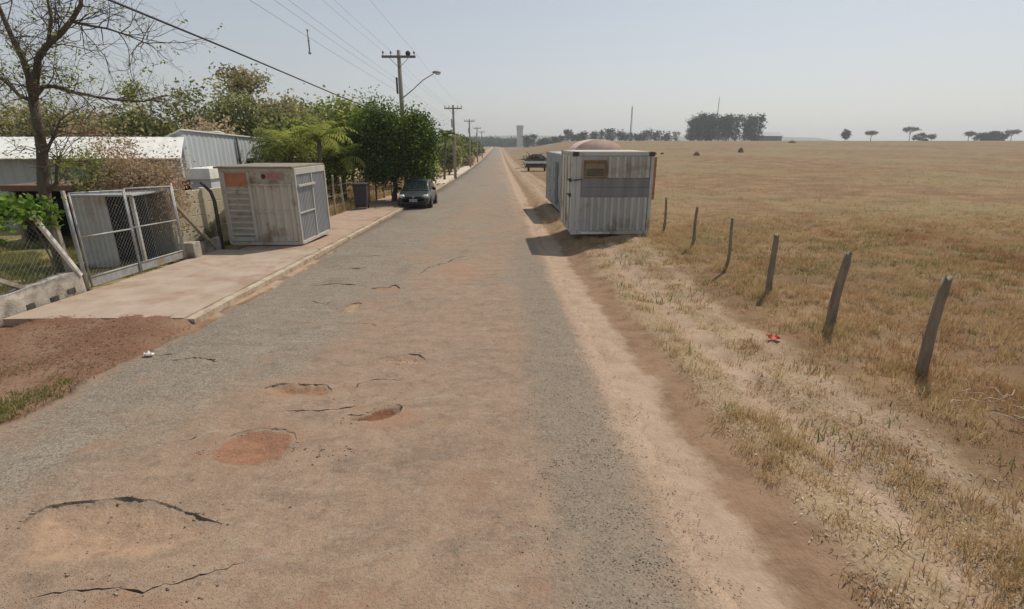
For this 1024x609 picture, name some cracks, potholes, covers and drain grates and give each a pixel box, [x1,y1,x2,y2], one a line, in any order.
pothole [207,427,297,468]
pothole [345,404,403,422]
pothole [265,383,332,397]
pothole [343,302,361,313]
crack [156,353,216,362]
crack [24,561,246,600]
